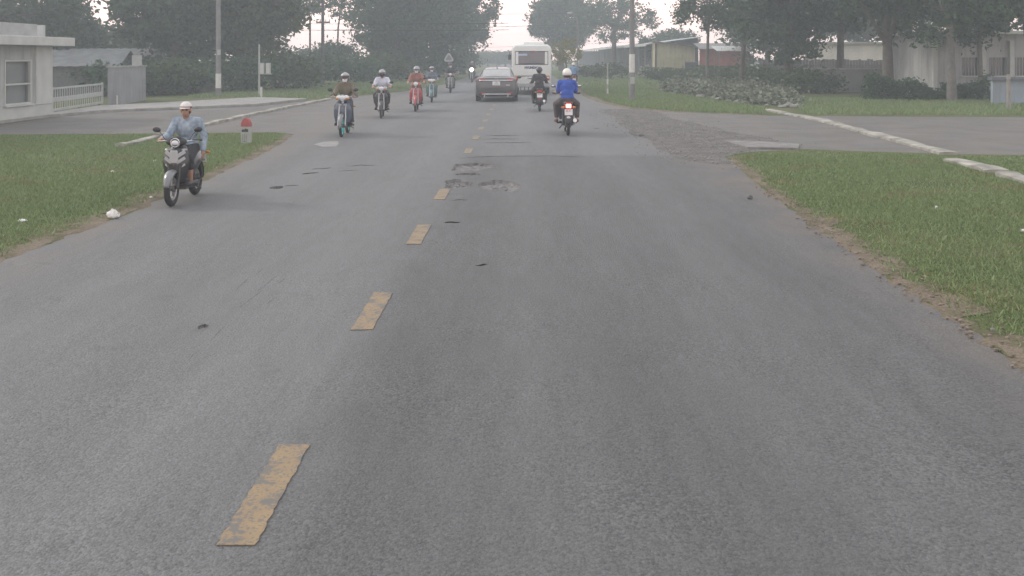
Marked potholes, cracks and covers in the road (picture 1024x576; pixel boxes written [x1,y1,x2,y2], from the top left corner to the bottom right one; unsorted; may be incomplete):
pothole [452,163,497,174]
pothole [477,180,520,192]
pothole [444,179,473,188]
